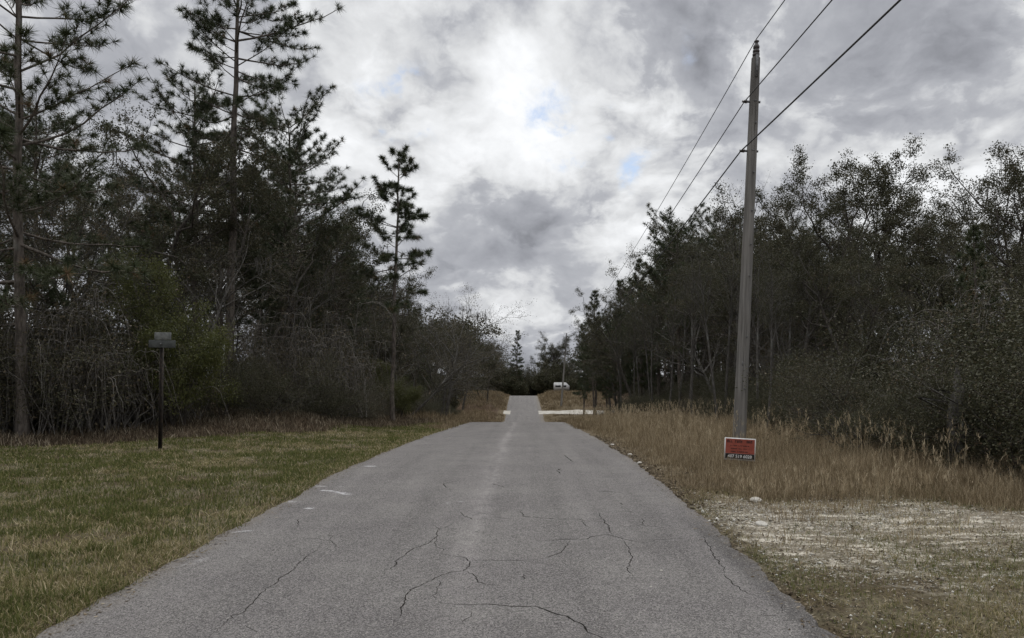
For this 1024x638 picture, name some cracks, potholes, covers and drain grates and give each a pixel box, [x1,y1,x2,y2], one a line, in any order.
crack [520,491,684,579]
crack [393,553,603,638]
crack [384,514,472,571]
crack [703,536,749,594]
crack [203,520,339,638]
